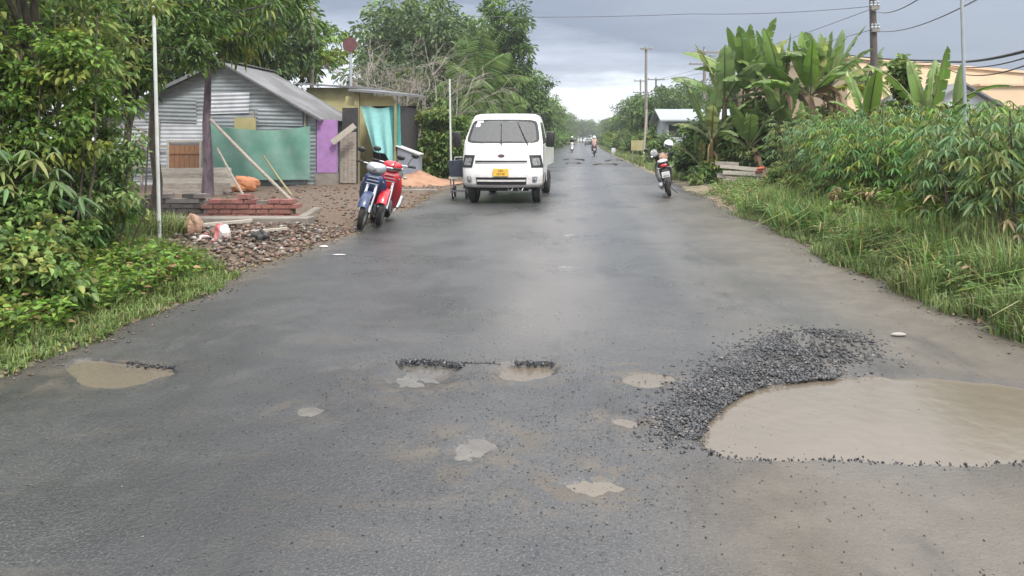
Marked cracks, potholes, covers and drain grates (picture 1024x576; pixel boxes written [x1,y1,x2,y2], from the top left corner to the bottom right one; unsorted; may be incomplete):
pothole [291,403,333,418]
pothole [488,359,564,382]
pothole [550,474,638,501]
pothole [618,371,681,388]
pothole [62,357,180,389]
pothole [694,372,1024,471]
pothole [437,431,508,468]
pothole [603,416,649,429]
pothole [369,357,469,391]
